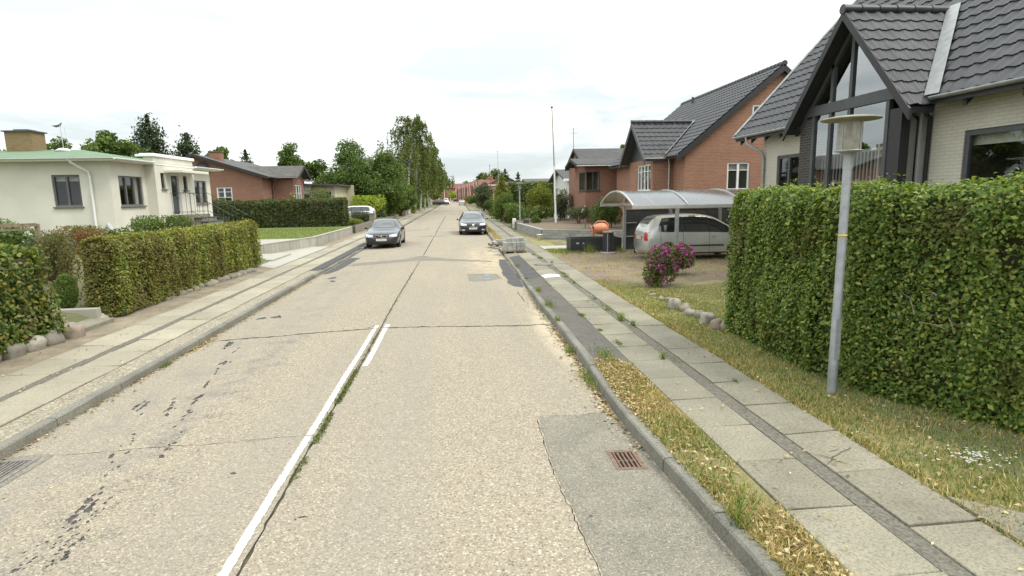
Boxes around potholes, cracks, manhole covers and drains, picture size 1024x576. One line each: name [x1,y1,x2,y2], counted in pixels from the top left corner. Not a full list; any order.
drain grate [0,458,39,483]
drain grate [606,449,648,470]
